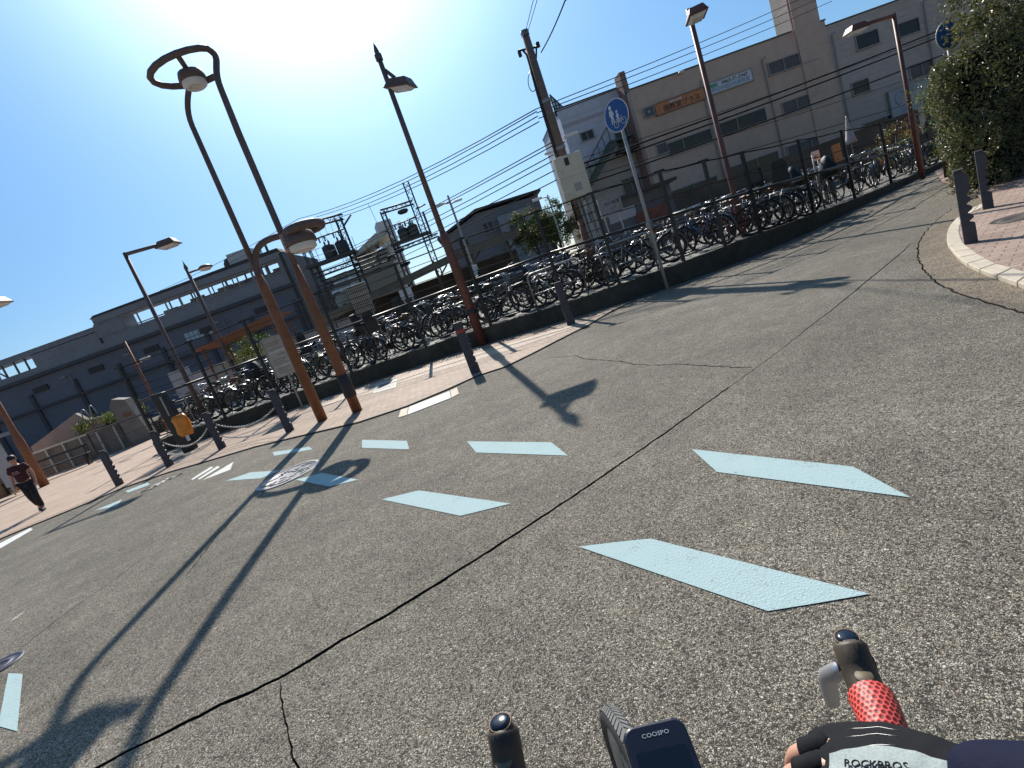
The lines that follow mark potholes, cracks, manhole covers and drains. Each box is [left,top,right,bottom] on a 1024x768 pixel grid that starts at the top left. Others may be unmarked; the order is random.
crack [185,492,264,576]
manhole cover [255,460,320,492]
manhole cover [0,650,25,672]
crack [553,355,750,368]
